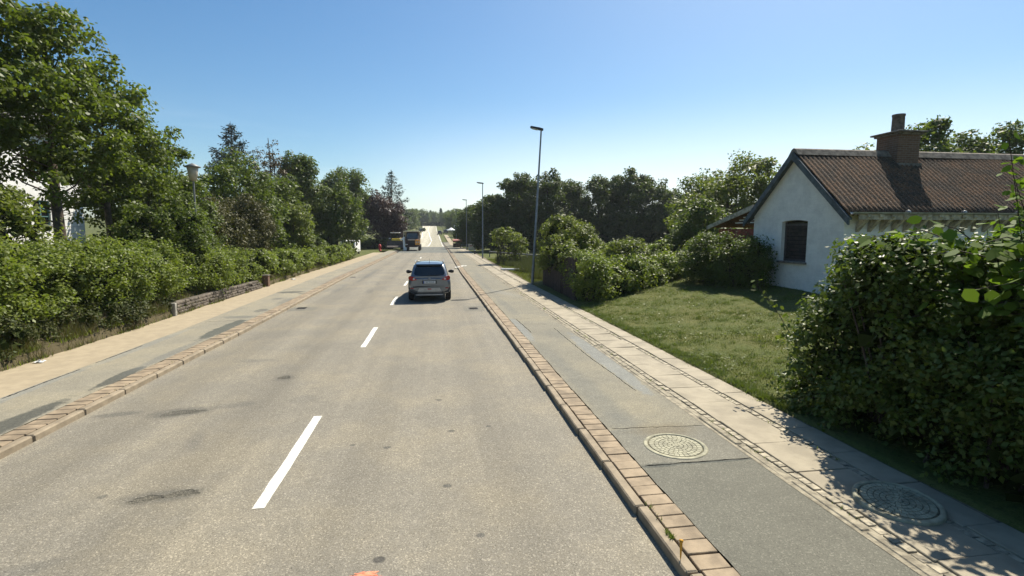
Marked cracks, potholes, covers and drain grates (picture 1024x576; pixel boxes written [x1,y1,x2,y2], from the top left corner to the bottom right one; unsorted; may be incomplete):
manhole cover [852,480,947,526]
manhole cover [643,433,708,460]
